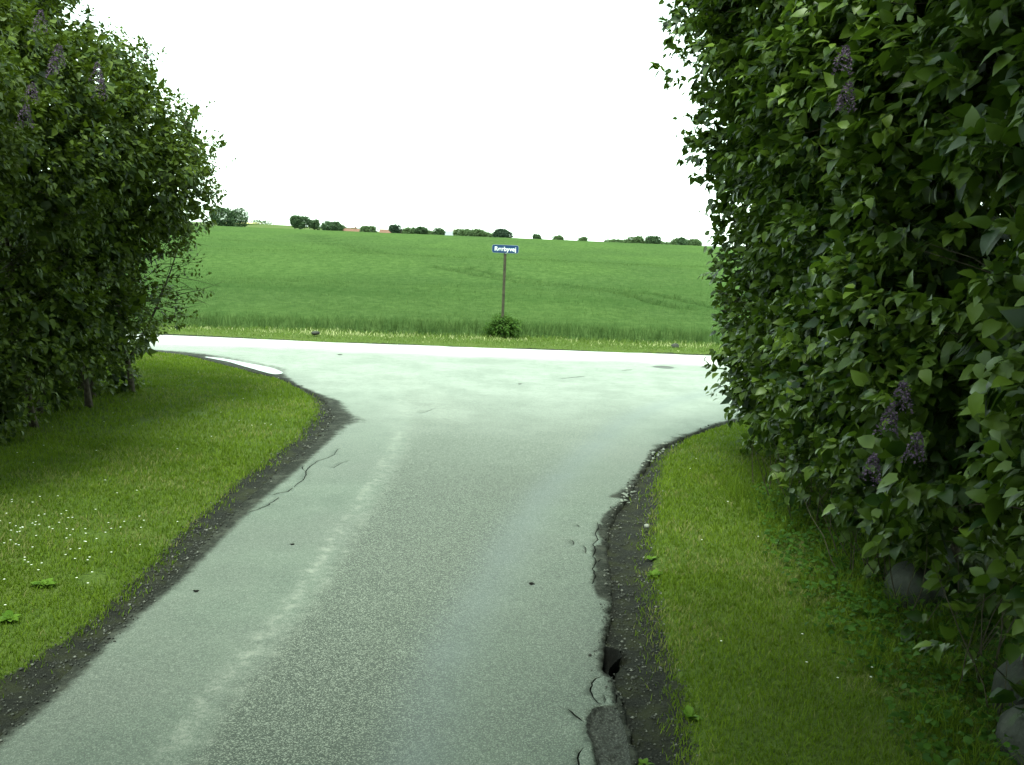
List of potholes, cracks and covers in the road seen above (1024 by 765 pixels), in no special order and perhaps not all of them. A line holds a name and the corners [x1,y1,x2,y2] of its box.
crack [251,451,337,512]
crack [568,677,617,722]
pothole [602,646,622,677]
crack [573,522,602,584]
